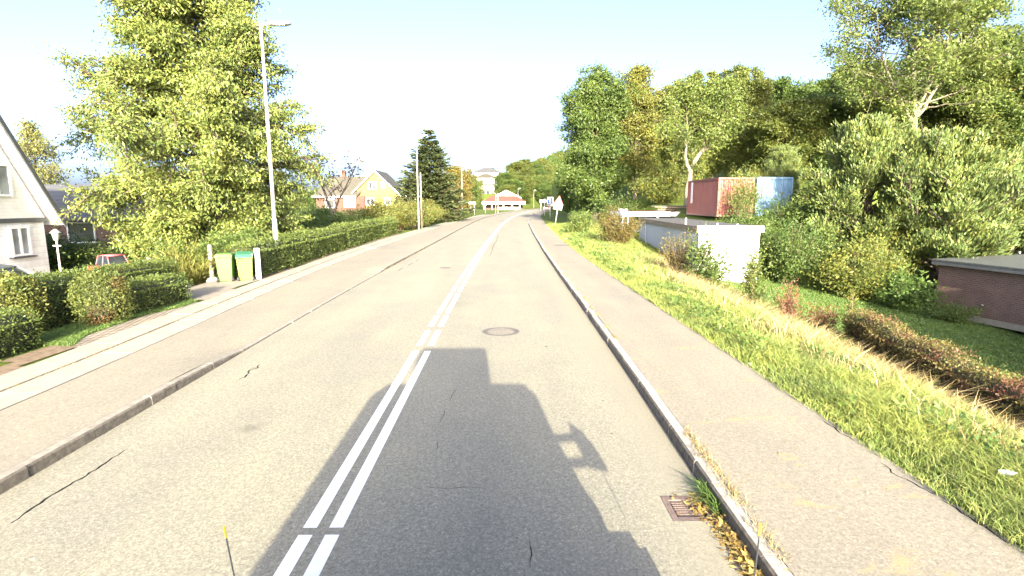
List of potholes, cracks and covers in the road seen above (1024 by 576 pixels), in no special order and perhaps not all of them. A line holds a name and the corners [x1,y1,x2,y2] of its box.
crack [11,450,125,523]
manhole cover [482,327,520,336]
drain grate [660,496,715,521]
